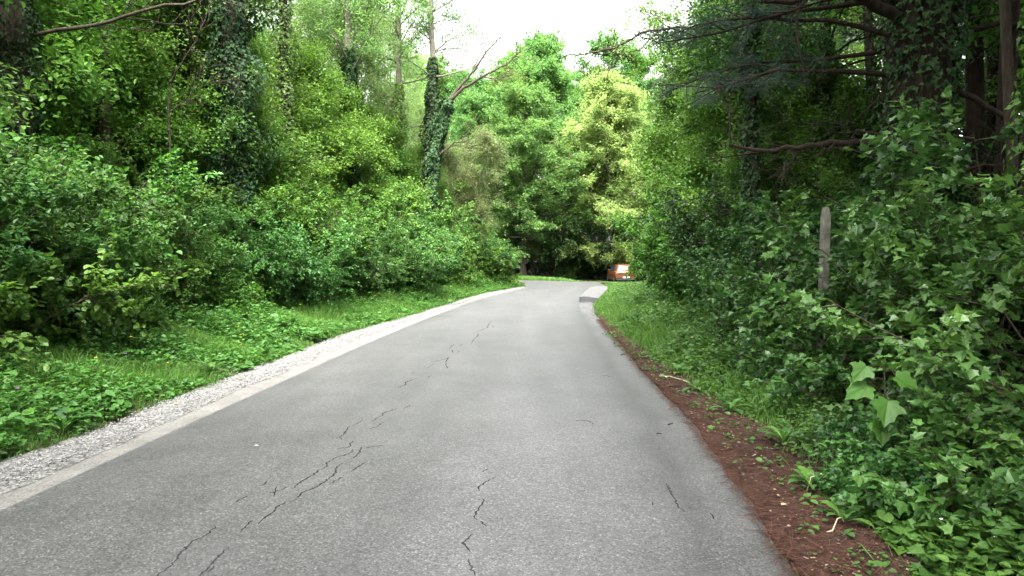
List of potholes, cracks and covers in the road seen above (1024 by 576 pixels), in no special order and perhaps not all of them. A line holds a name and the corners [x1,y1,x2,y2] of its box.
crack [652,483,686,512]
crack [461,469,497,576]
crack [157,420,382,576]
